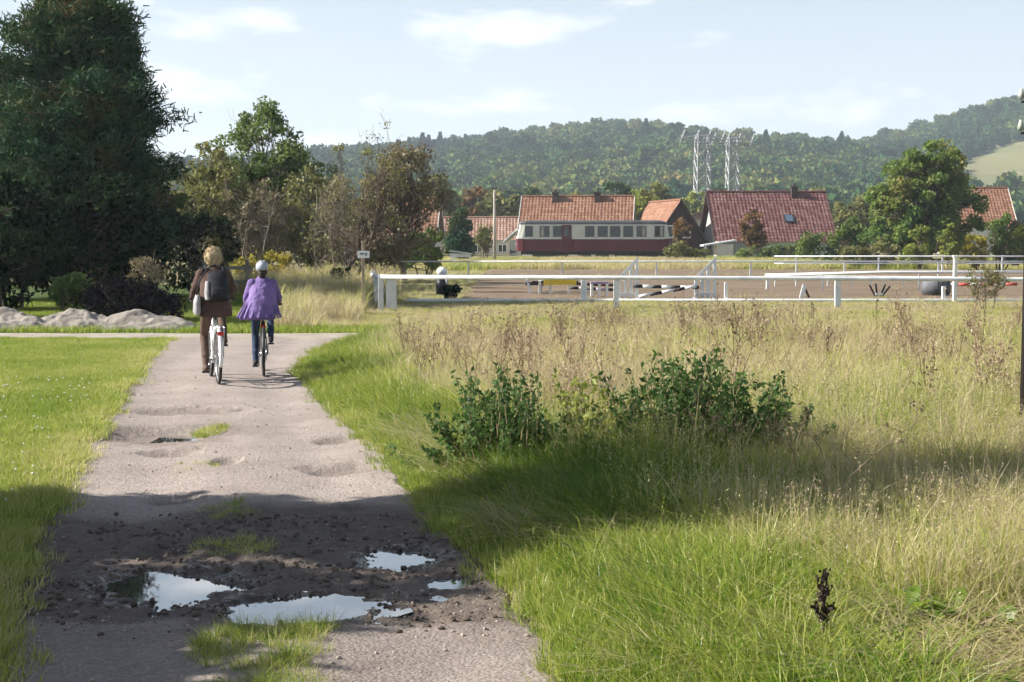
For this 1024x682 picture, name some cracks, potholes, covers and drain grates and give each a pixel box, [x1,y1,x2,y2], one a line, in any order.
pothole [134,445,208,458]
pothole [310,435,359,445]
pothole [77,563,263,611]
pothole [422,570,488,590]
pothole [351,544,453,572]
pothole [117,404,273,418]
pothole [212,593,372,625]
pothole [97,423,235,445]
pothole [286,460,391,478]
